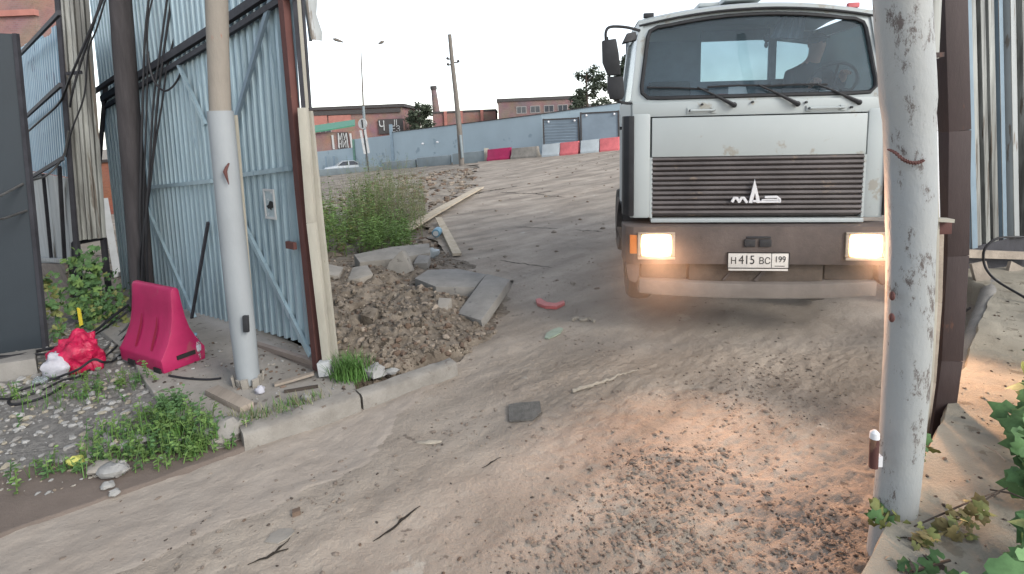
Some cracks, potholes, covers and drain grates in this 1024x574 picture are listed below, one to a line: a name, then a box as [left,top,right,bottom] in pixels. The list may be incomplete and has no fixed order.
crack [248,538,290,565]
crack [476,186,558,197]
crack [374,506,420,541]
